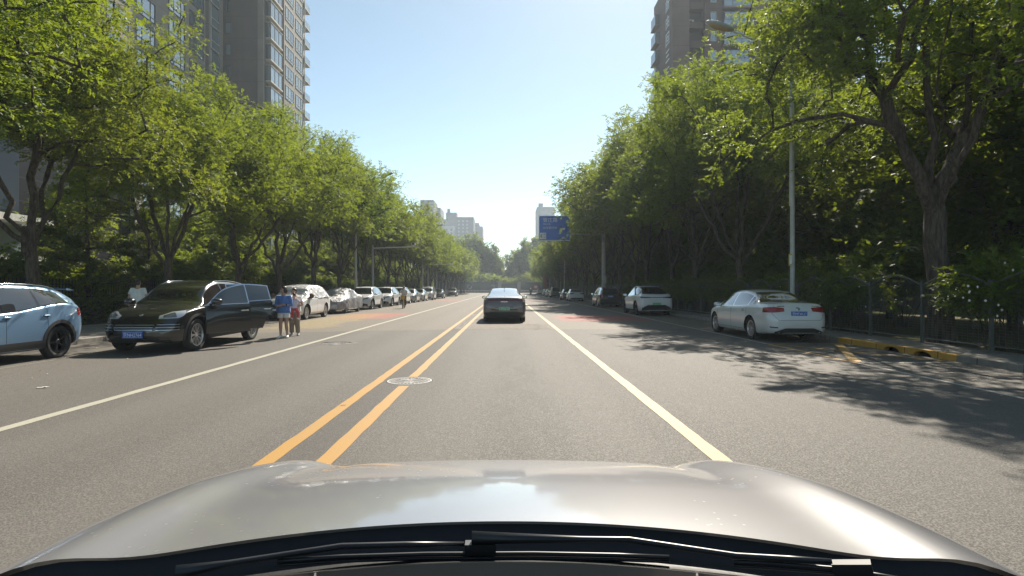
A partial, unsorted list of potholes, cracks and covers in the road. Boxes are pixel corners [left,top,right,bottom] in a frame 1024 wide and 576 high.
manhole cover [387,377,432,385]
